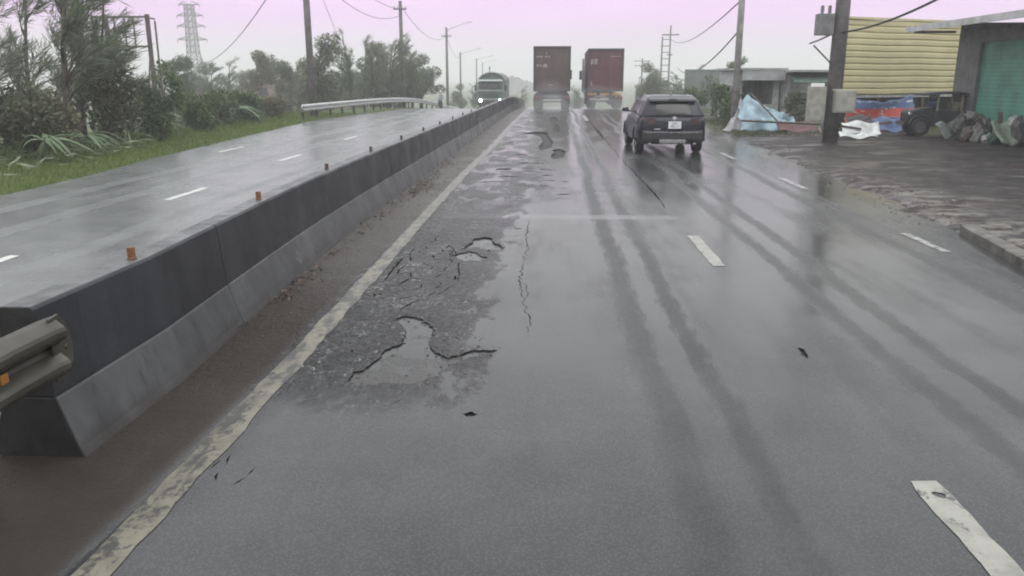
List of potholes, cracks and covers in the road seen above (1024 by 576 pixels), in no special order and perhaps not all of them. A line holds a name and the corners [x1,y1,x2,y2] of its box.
crack [584,114,665,208]
pothole [453,251,488,261]
crack [514,220,531,334]
pothole [348,316,497,386]
pothole [462,237,503,250]
pothole [524,132,553,150]
pothole [551,149,566,159]
